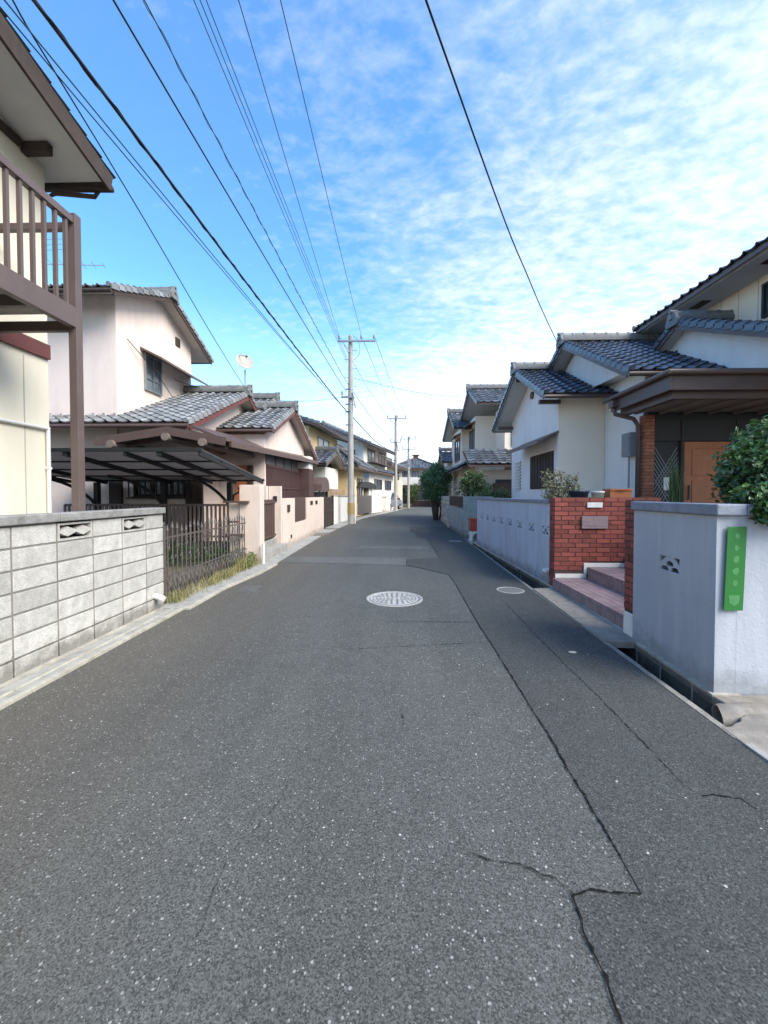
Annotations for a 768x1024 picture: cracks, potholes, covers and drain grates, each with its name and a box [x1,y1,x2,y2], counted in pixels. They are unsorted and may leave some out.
crack [166,778,289,1024]
manhole cover [366,591,423,607]
